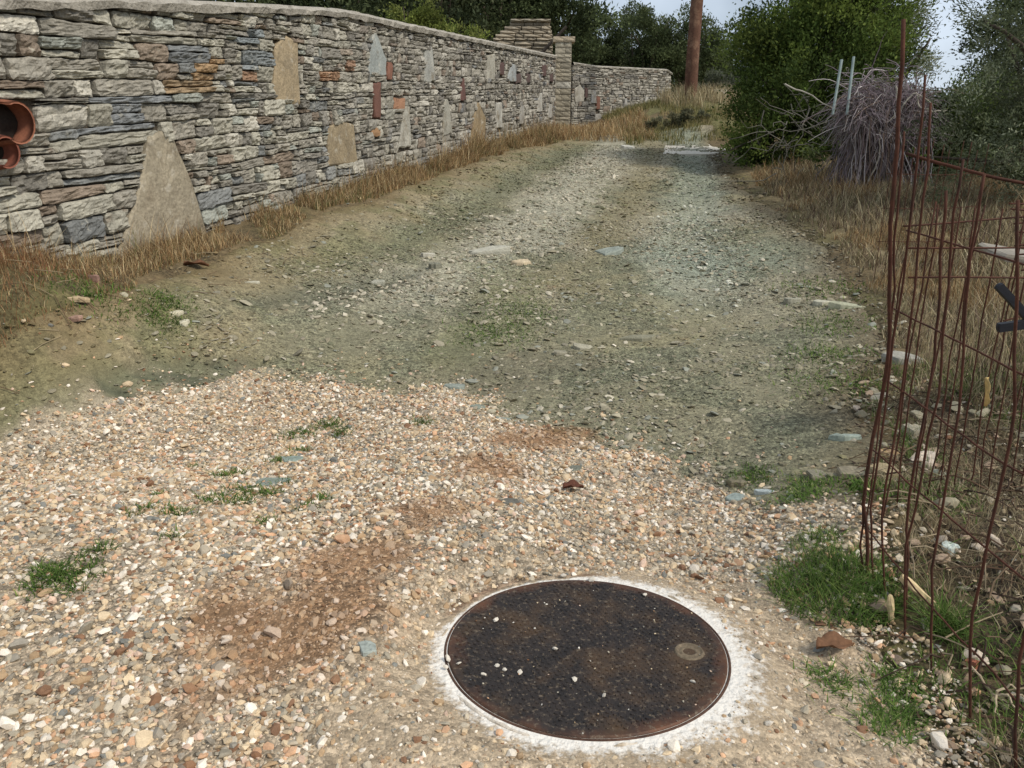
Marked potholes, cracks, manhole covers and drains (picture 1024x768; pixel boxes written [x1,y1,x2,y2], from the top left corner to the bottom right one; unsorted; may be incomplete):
manhole cover [442,580,731,747]
